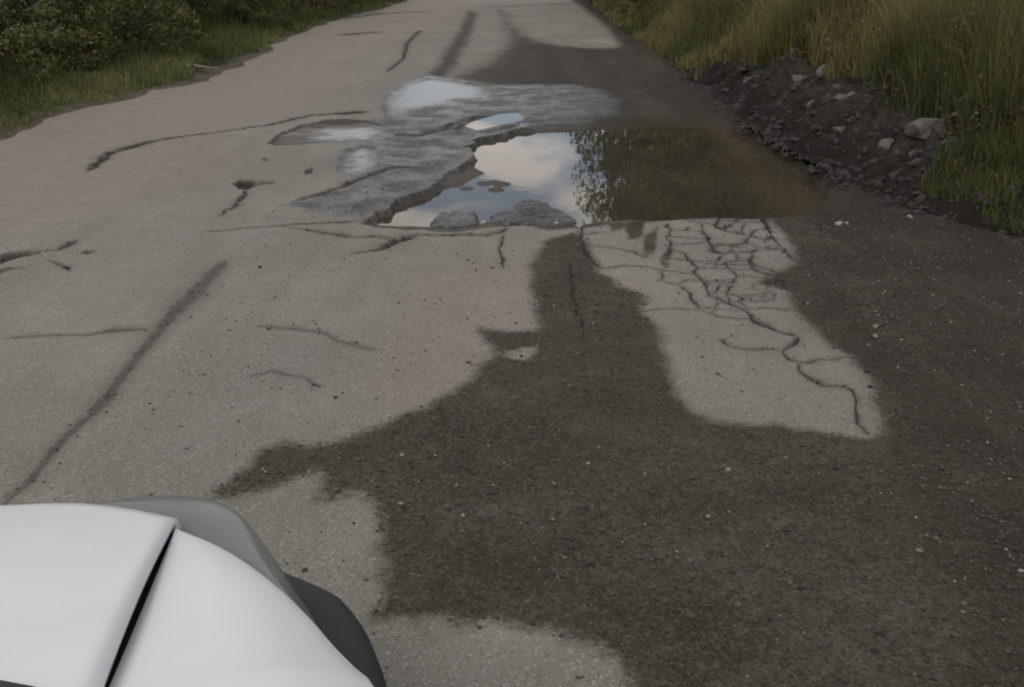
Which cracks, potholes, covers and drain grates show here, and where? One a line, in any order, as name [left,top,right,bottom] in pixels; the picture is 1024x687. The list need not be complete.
pothole [335,144,384,176]
crack [251,370,320,388]
pothole [266,118,397,146]
crack [258,326,376,351]
crack [205,190,508,268]
crack [45,240,77,271]
pothole [360,114,857,232]
